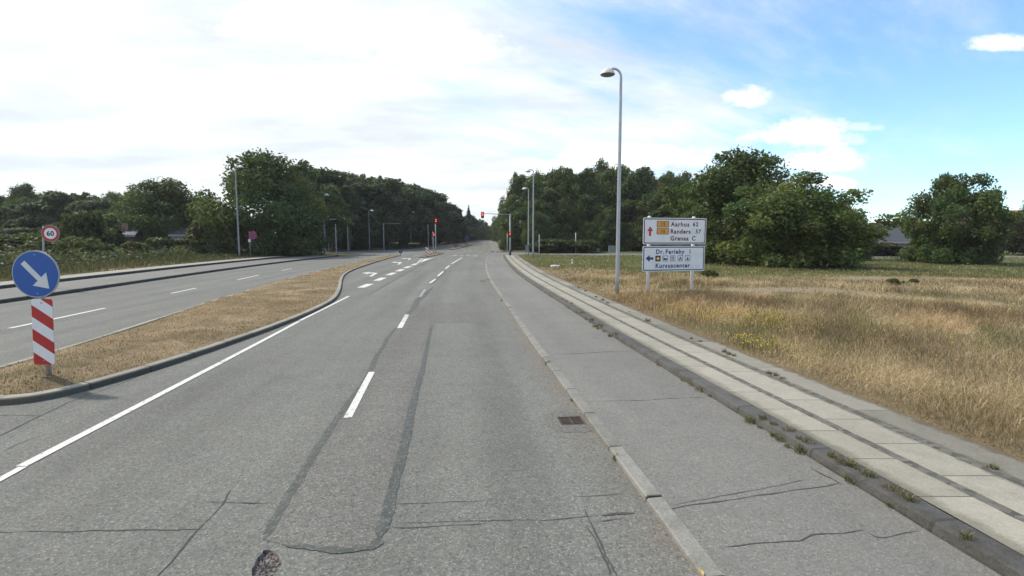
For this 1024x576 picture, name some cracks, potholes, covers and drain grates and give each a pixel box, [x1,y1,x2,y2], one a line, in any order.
crack [21,491,259,576]
pothole [252,550,282,576]
drain grate [557,416,586,425]
crack [661,468,839,516]
crack [725,530,914,547]
crack [390,494,632,576]
